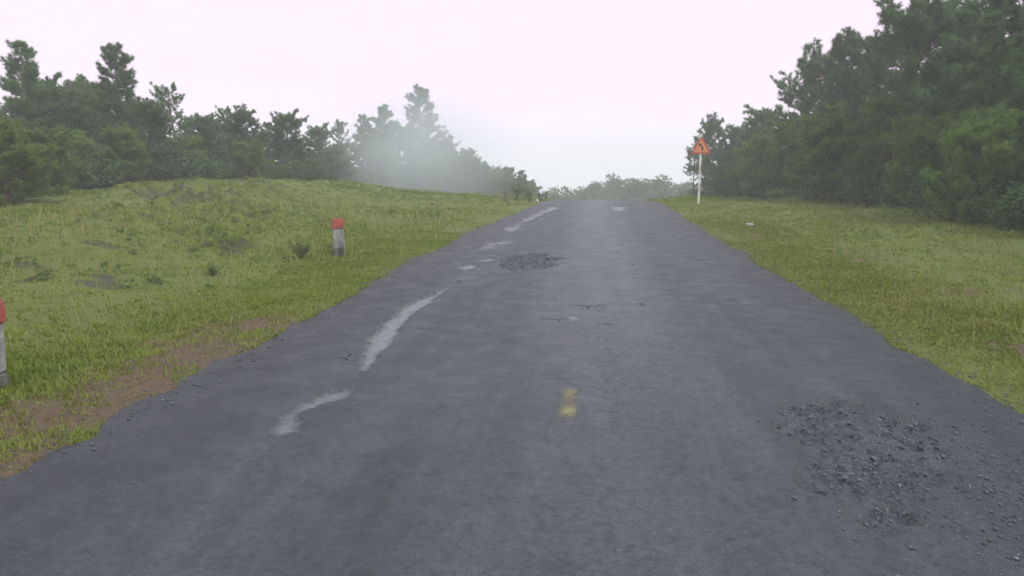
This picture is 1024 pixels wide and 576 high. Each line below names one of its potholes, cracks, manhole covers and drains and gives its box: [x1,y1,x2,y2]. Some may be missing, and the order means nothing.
pothole [497,253,566,273]
pothole [764,396,979,545]
